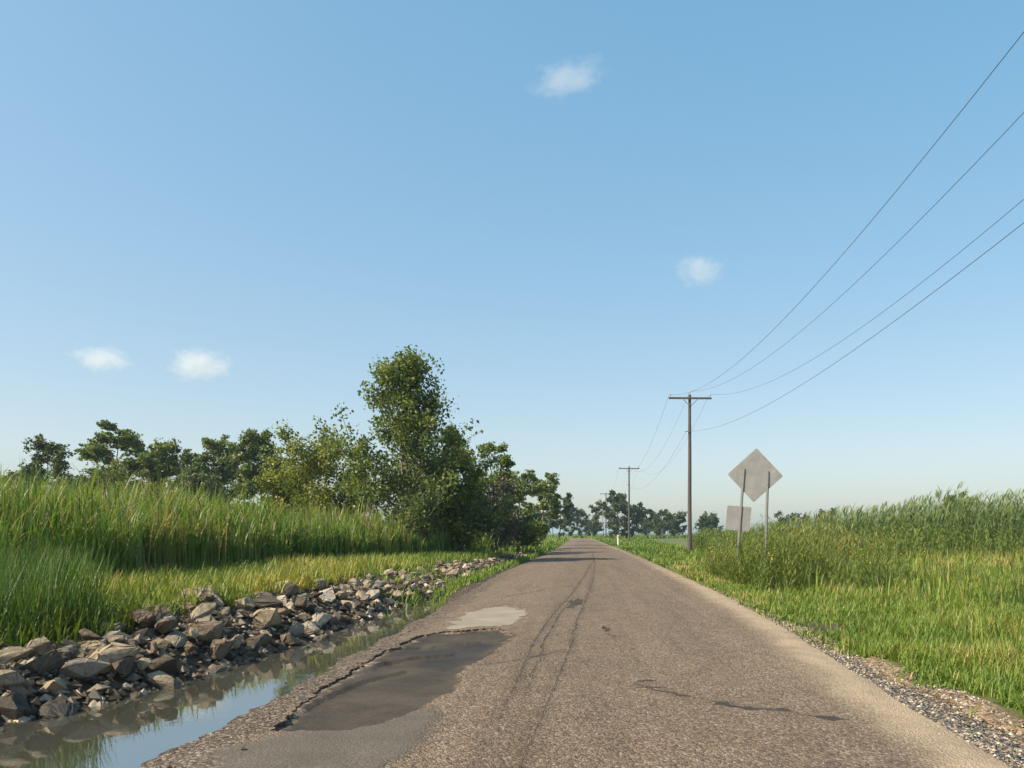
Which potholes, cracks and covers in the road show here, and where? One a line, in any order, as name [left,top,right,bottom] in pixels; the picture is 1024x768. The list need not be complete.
crack [629,679,849,722]
crack [479,551,621,768]
